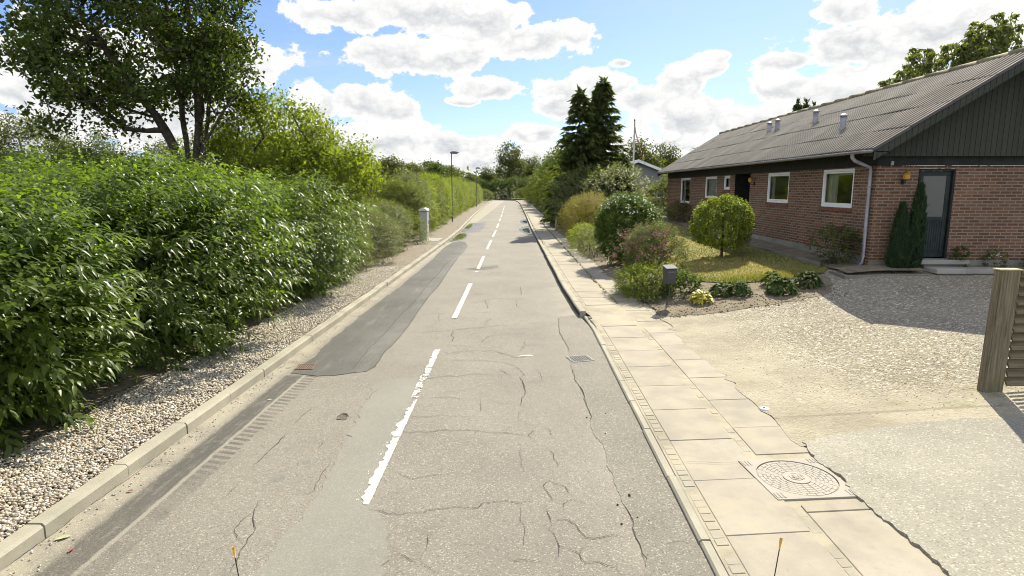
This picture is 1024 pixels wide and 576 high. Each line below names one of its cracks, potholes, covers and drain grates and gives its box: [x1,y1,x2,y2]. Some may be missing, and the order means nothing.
crack [370,294,625,567]
manhole cover [738,458,857,501]
crack [216,502,258,567]
